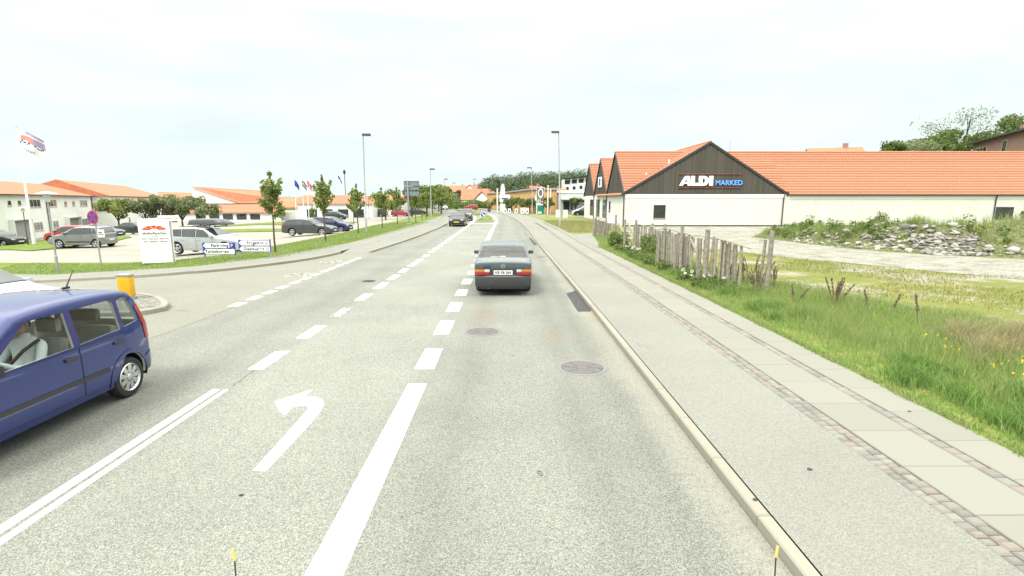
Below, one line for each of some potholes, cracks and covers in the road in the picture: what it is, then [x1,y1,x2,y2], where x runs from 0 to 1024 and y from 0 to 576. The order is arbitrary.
manhole cover [464,327,502,337]
manhole cover [557,360,607,376]
